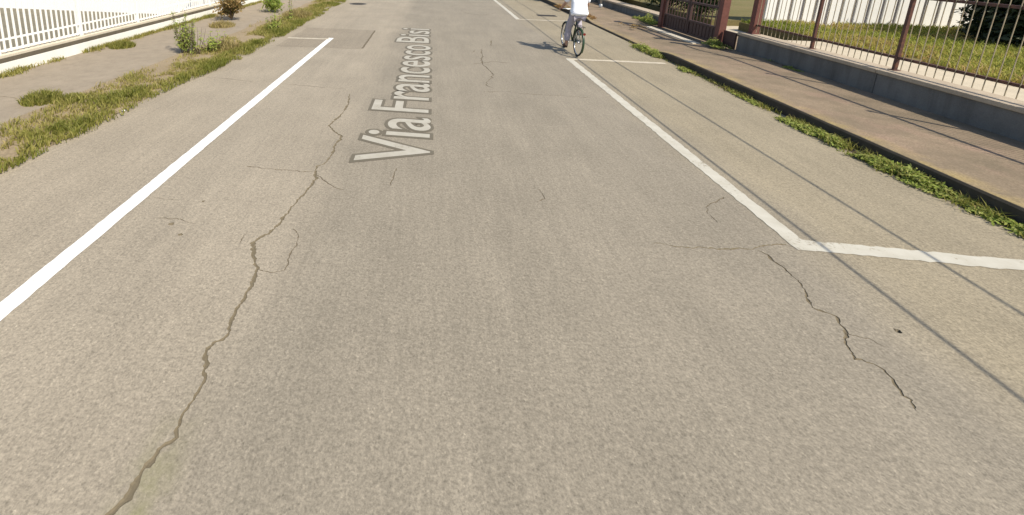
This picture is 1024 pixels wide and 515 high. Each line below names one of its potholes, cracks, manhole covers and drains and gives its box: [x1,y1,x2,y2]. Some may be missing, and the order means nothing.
crack [661,243,916,410]
crack [474,41,575,97]
crack [105,84,350,515]
